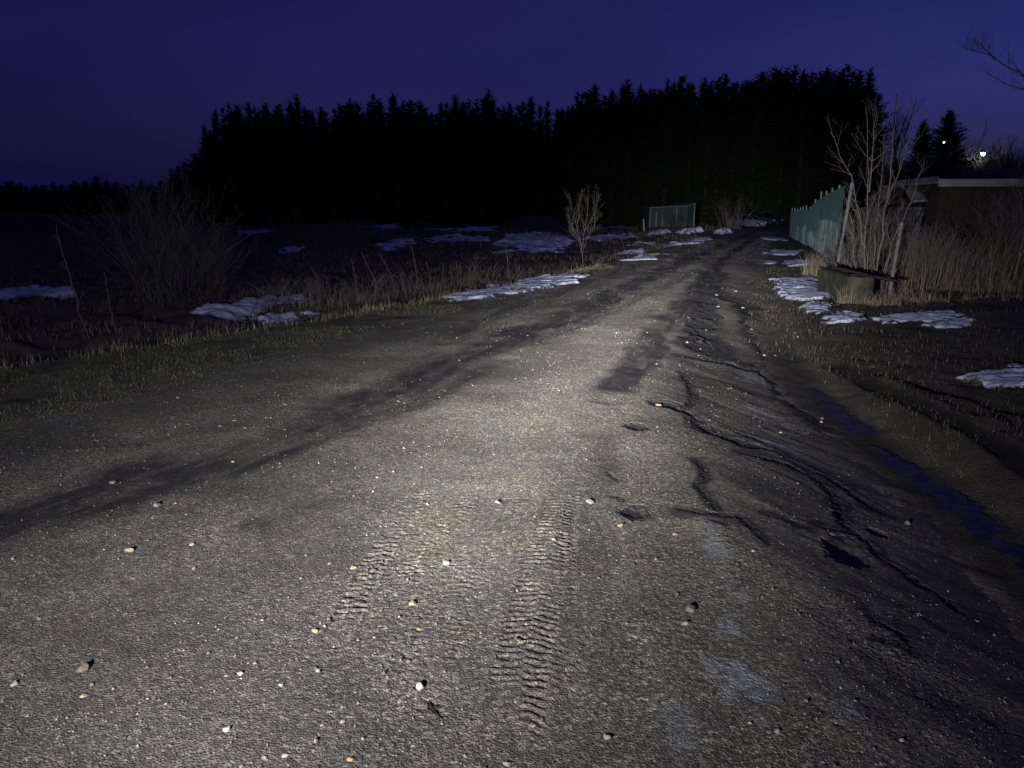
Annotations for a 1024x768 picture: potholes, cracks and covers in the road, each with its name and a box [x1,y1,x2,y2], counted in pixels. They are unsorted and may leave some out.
pothole [822,535,871,569]
pothole [620,505,651,521]
pothole [623,423,648,431]
crack [666,273,985,654]
